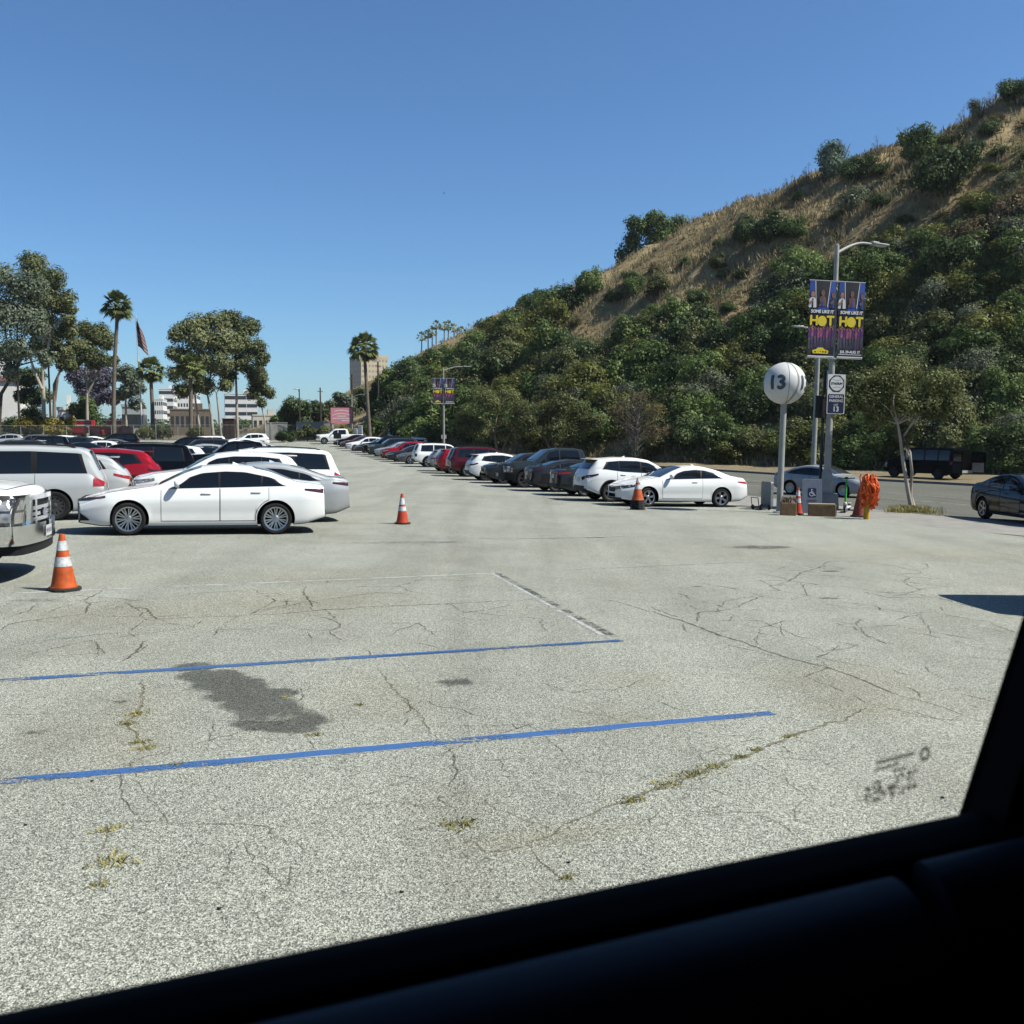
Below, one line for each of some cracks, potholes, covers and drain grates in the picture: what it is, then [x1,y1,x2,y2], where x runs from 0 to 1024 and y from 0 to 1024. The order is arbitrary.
crack [609,564,1001,730]
crack [120,674,806,881]
crack [3,586,542,660]
